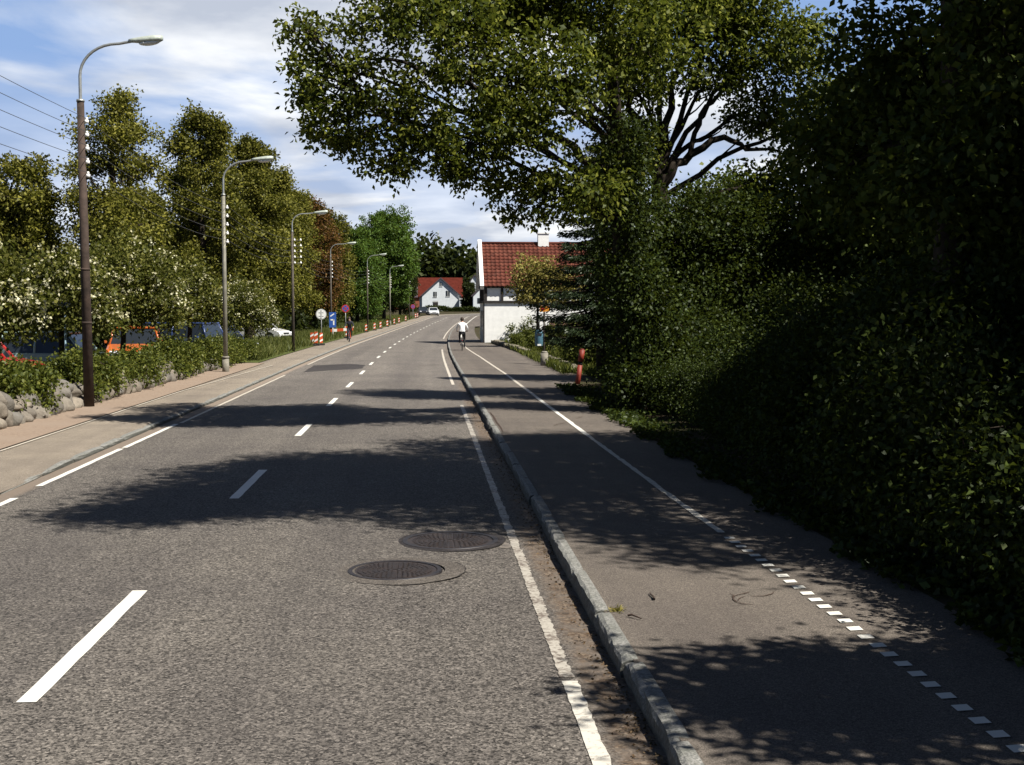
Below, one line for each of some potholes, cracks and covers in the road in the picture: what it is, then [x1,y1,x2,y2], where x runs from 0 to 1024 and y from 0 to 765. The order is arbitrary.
manhole cover [398,531,506,552]
manhole cover [338,557,467,585]
